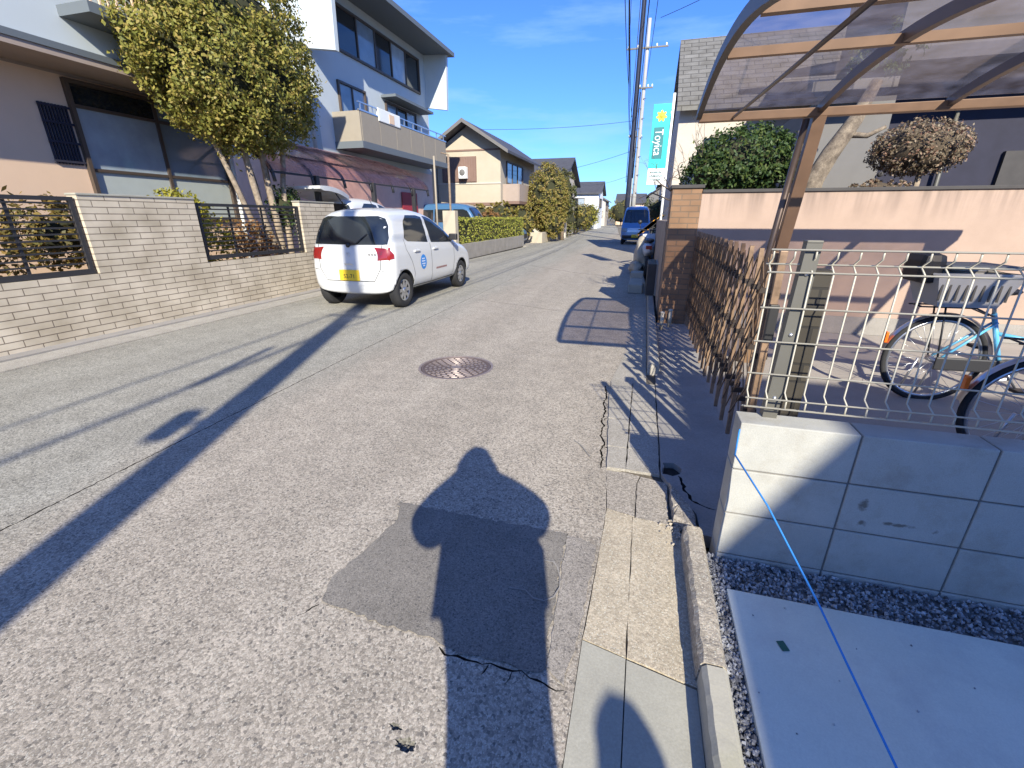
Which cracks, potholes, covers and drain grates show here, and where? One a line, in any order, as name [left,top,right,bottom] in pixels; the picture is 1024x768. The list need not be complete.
manhole cover [418,356,493,380]
crack [599,386,608,468]
pothole [395,736,416,753]
crack [439,647,564,692]
crack [678,476,714,510]
